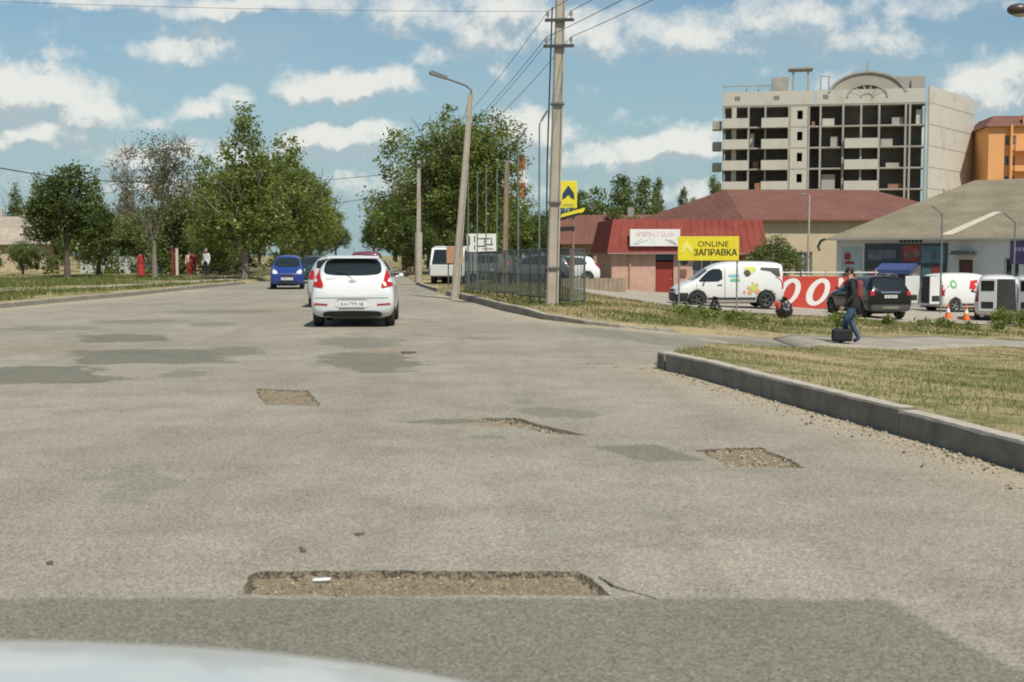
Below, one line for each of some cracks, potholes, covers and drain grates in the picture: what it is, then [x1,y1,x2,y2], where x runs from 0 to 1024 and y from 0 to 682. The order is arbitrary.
pothole [695,447,804,468]
crack [598,577,657,599]
pothole [480,418,586,435]
pothole [242,570,611,597]
pothole [256,389,320,406]
